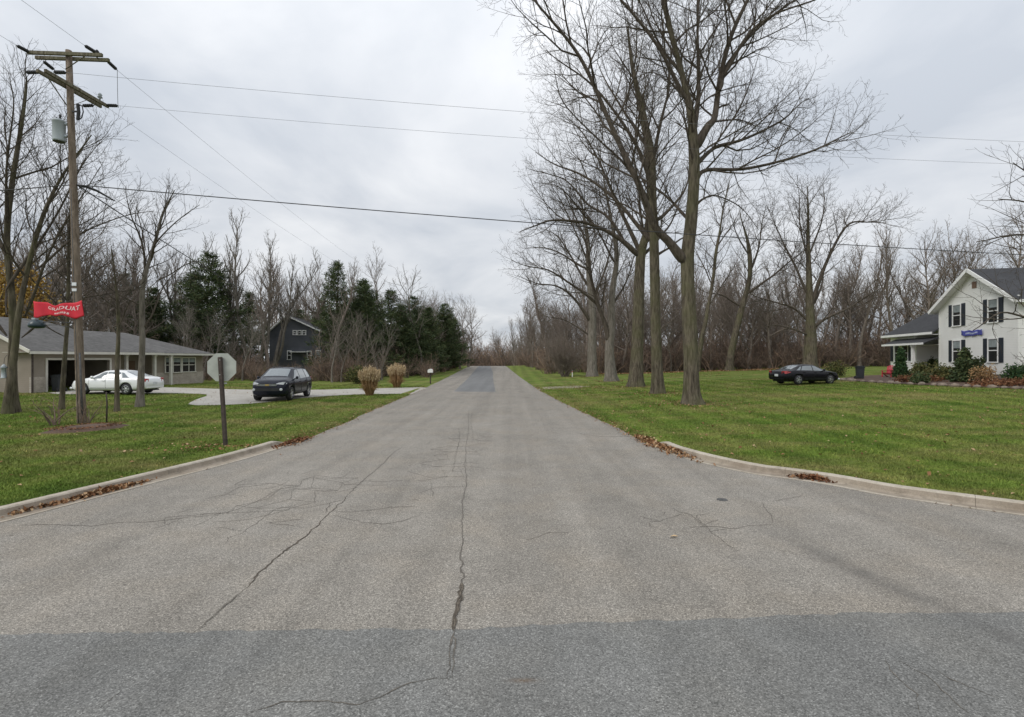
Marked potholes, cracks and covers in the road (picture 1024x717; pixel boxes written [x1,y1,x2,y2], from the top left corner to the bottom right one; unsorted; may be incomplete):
crack [246,678,433,715]
crack [887,662,997,713]
crack [34,452,416,633]
crack [640,496,799,551]
